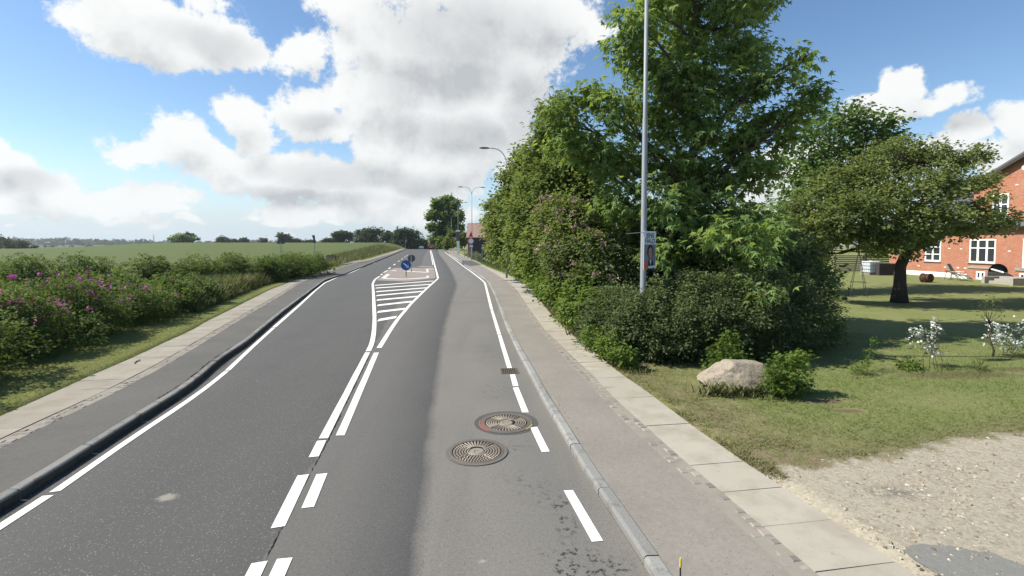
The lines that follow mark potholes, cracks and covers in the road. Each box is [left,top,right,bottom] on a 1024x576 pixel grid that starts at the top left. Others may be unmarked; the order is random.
manhole cover [474,411,538,435]
manhole cover [445,439,508,466]
